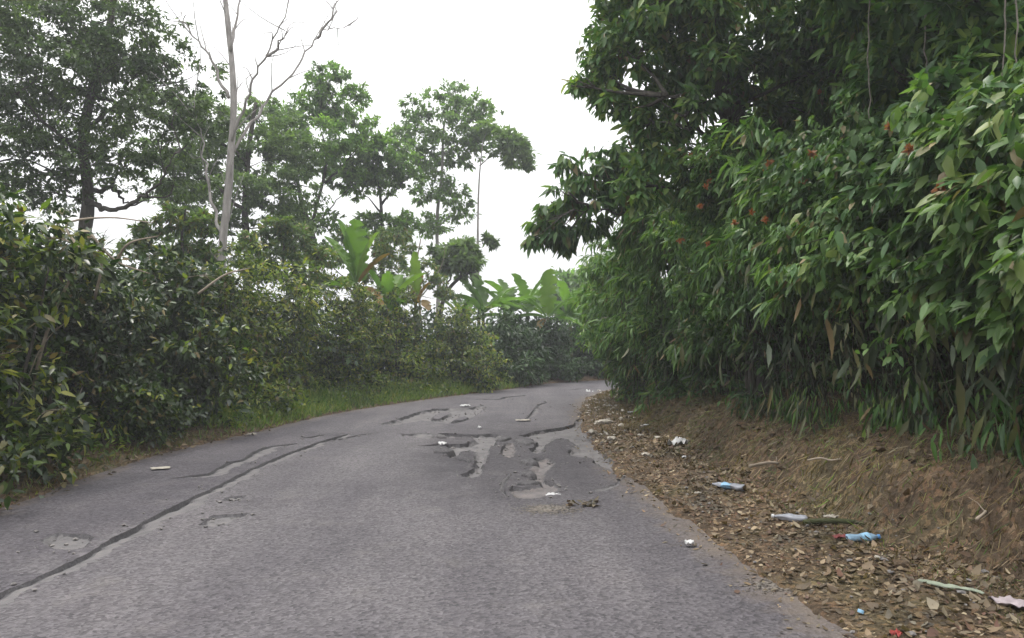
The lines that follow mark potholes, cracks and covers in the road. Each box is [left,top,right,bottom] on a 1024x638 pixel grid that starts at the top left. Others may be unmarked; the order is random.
pothole [382,405,486,425]
pothole [199,513,249,528]
pothole [39,532,94,550]
crack [0,434,366,608]
pothole [439,433,502,478]
pothole [500,442,518,458]
crack [458,395,548,419]
pothole [519,414,625,492]
pothole [509,458,560,499]
